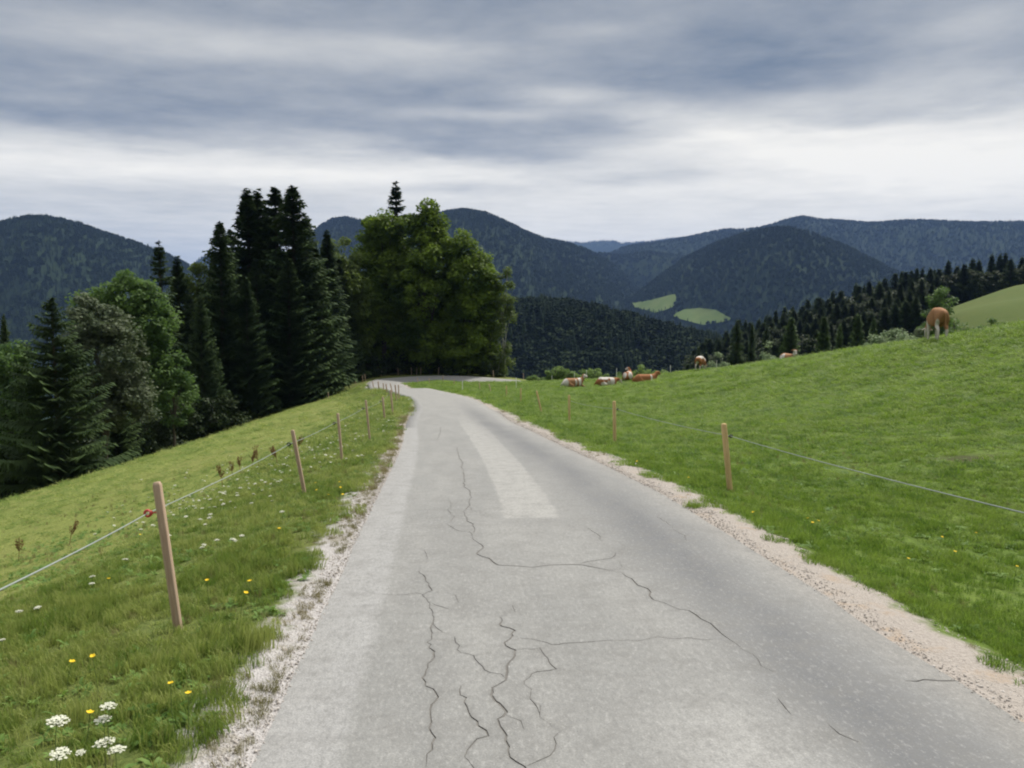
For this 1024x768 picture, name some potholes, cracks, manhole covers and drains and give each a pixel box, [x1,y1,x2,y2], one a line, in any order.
crack [450,456,774,672]
crack [406,552,701,768]
